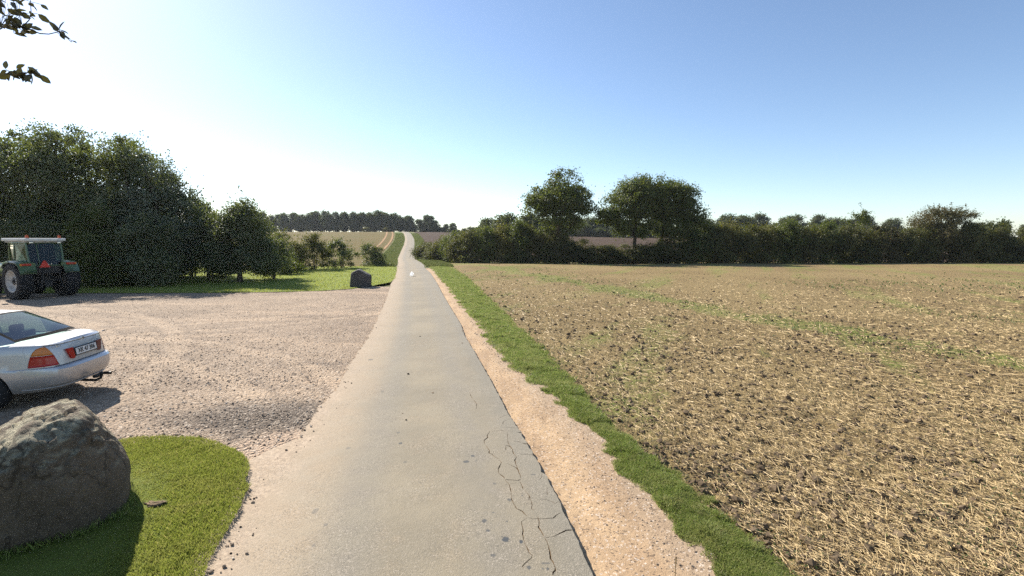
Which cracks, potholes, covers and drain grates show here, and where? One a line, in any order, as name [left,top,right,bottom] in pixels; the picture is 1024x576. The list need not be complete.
crack [484,415,571,576]
